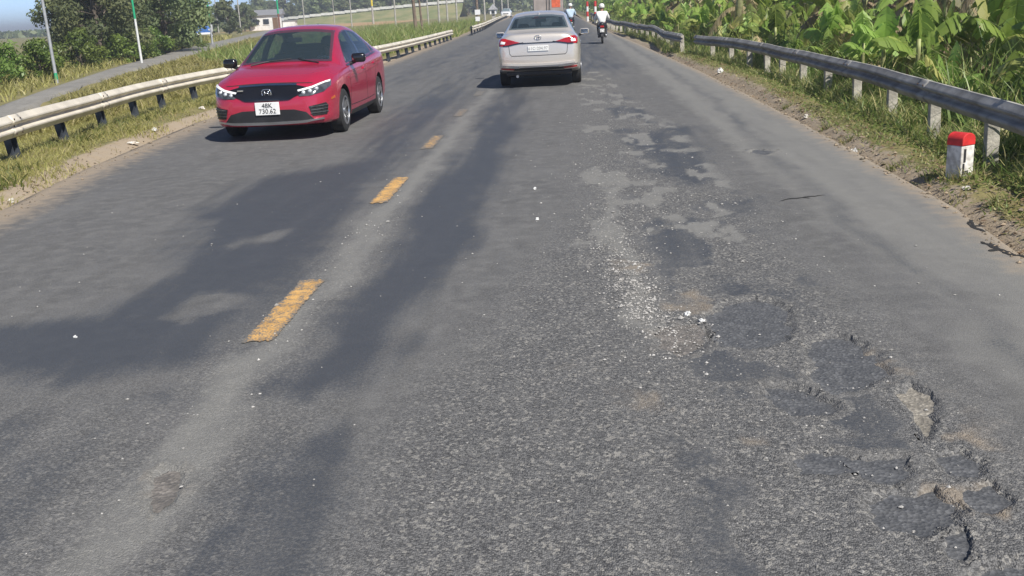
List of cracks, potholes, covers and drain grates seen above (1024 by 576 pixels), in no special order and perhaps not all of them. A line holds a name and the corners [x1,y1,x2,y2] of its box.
pothole [742,148,782,156]
pothole [885,376,959,446]
pothole [914,441,1006,482]
pothole [840,478,986,546]
pothole [941,476,1024,524]
